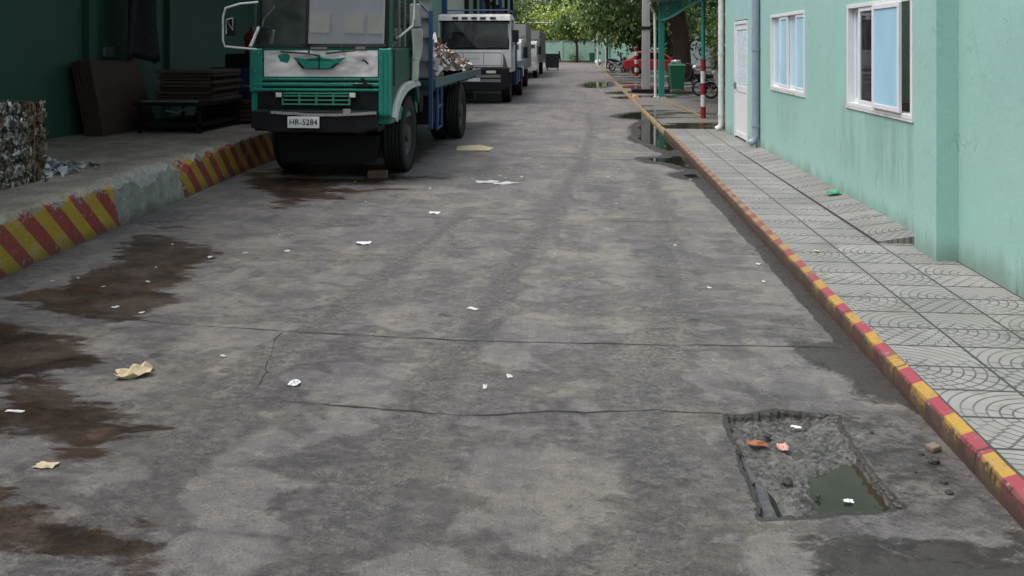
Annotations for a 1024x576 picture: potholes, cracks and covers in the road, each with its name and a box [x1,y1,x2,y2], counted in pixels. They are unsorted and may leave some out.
pothole [727,410,905,518]
crack [96,315,819,387]
